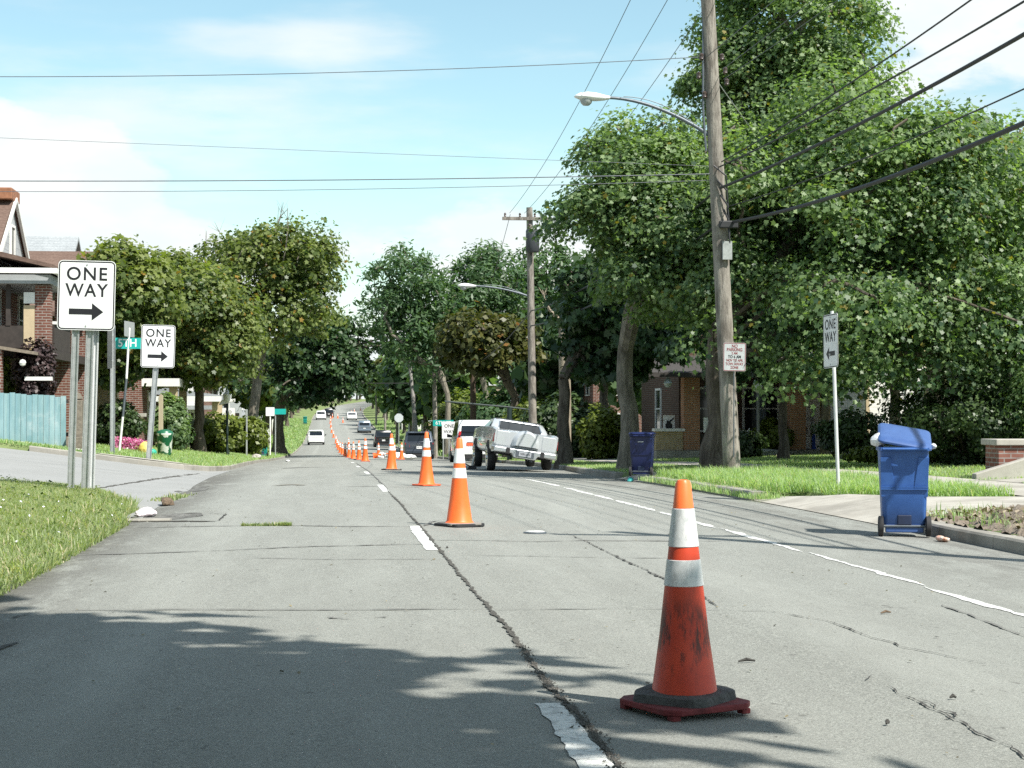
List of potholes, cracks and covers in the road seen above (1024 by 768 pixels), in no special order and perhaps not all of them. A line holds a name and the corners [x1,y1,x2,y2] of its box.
crack [774,611,980,662]
crack [567,533,717,606]
crack [865,675,1024,757]
crack [357,463,621,768]
crack [942,604,1024,636]
